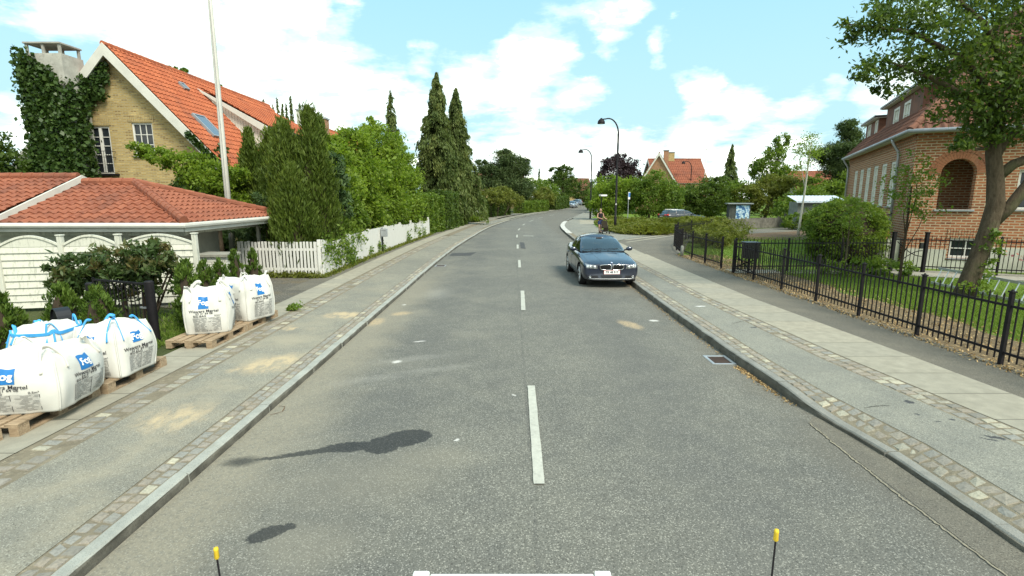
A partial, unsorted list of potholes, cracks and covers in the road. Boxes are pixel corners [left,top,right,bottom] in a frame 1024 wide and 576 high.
drain grate [702,355,737,365]
